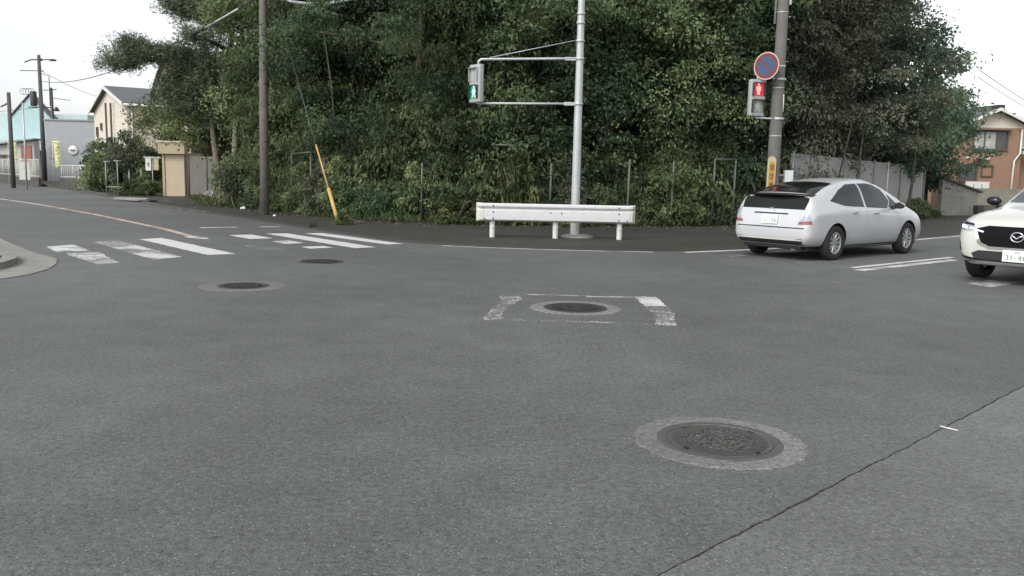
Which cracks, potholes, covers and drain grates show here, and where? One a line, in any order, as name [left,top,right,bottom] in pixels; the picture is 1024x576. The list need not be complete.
manhole cover [199,281,286,292]
manhole cover [632,416,809,471]
manhole cover [529,301,621,316]
